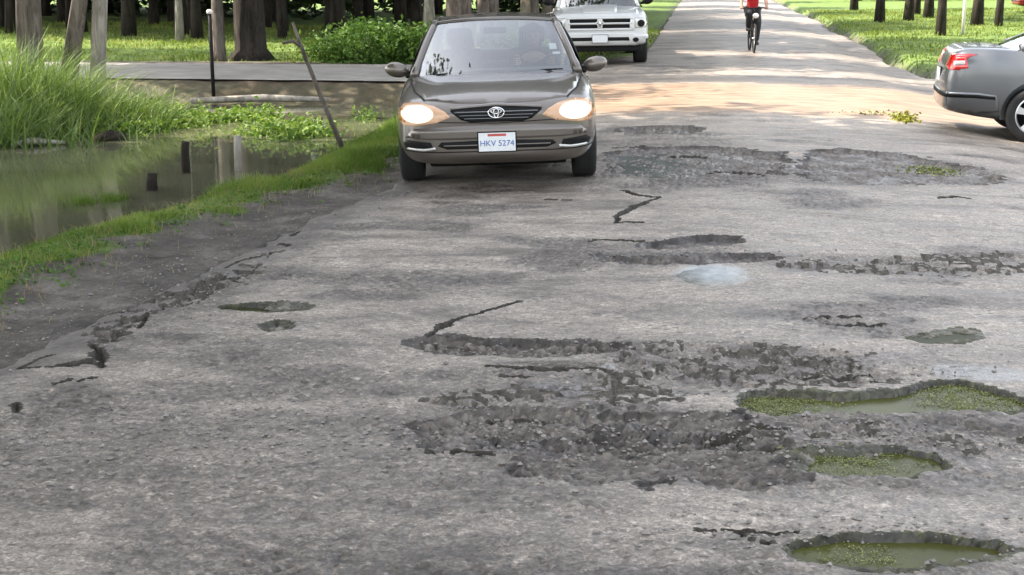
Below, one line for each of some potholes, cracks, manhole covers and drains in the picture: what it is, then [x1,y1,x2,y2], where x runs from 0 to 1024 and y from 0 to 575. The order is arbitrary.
pothole [902,326,986,345]
pothole [733,378,1024,416]
pothole [633,234,746,250]
pothole [779,442,953,479]
pothole [404,405,816,492]
pothole [785,147,1010,186]
crack [15,231,301,386]
crack [424,300,523,338]
pothole [782,530,1024,574]
pothole [614,125,707,135]
pothole [587,252,784,265]
pothole [602,145,796,182]
